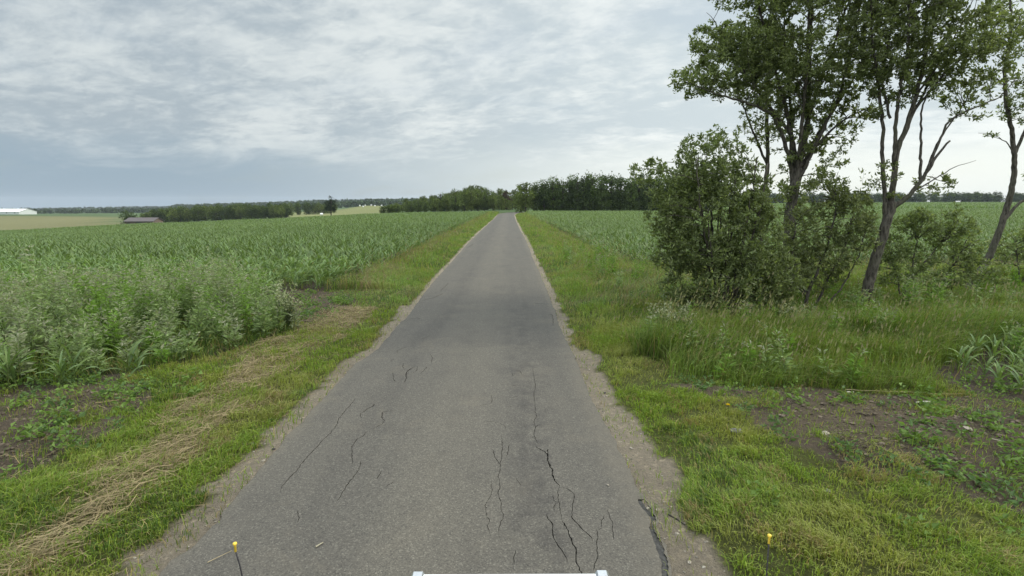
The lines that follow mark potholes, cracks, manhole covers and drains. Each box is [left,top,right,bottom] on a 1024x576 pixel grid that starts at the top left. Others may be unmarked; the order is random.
crack [638,499,669,576]
crack [491,371,614,574]
crack [281,404,386,497]
crack [485,421,521,535]
